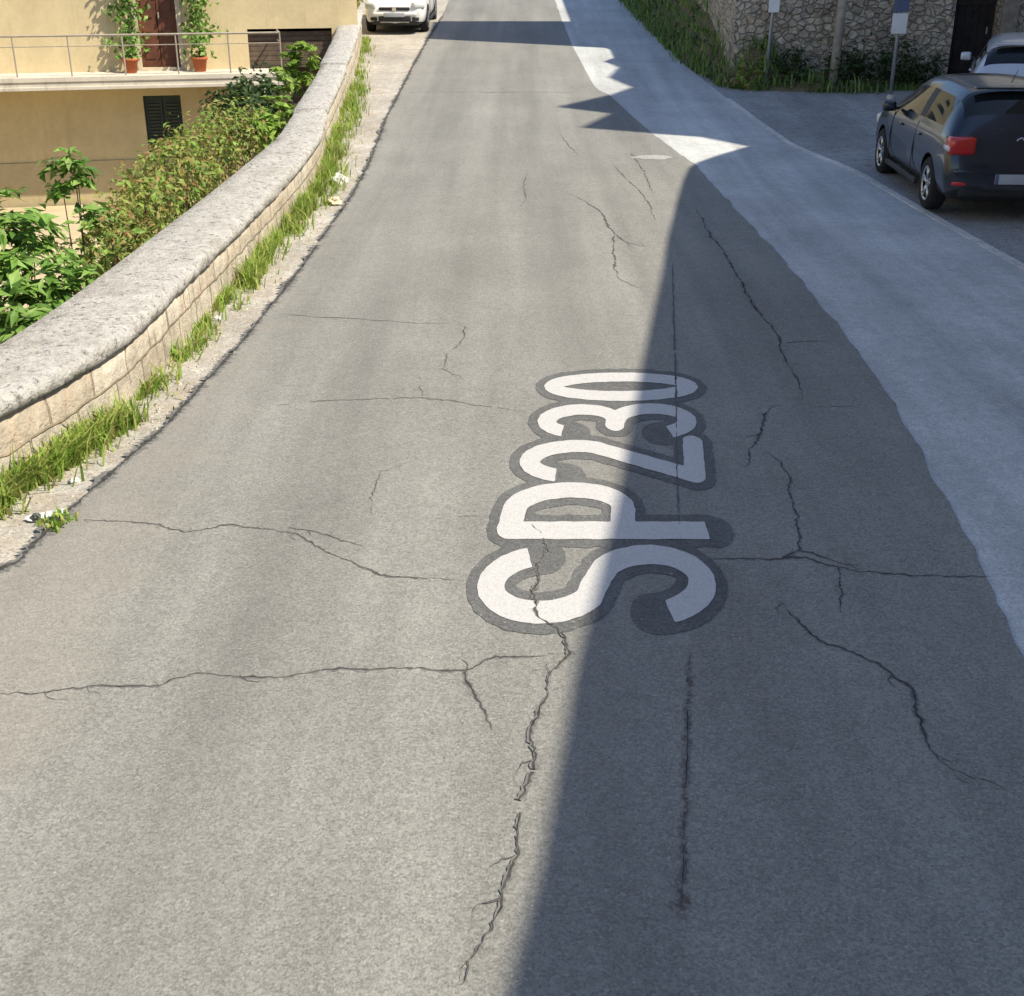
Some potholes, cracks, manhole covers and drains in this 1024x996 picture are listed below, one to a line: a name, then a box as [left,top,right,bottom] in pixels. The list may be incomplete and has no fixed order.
crack [282,377,517,411]
crack [695,207,1001,787]
crack [0,525,575,984]
crack [570,194,656,289]
crack [0,15,471,581]
crack [616,153,656,220]
